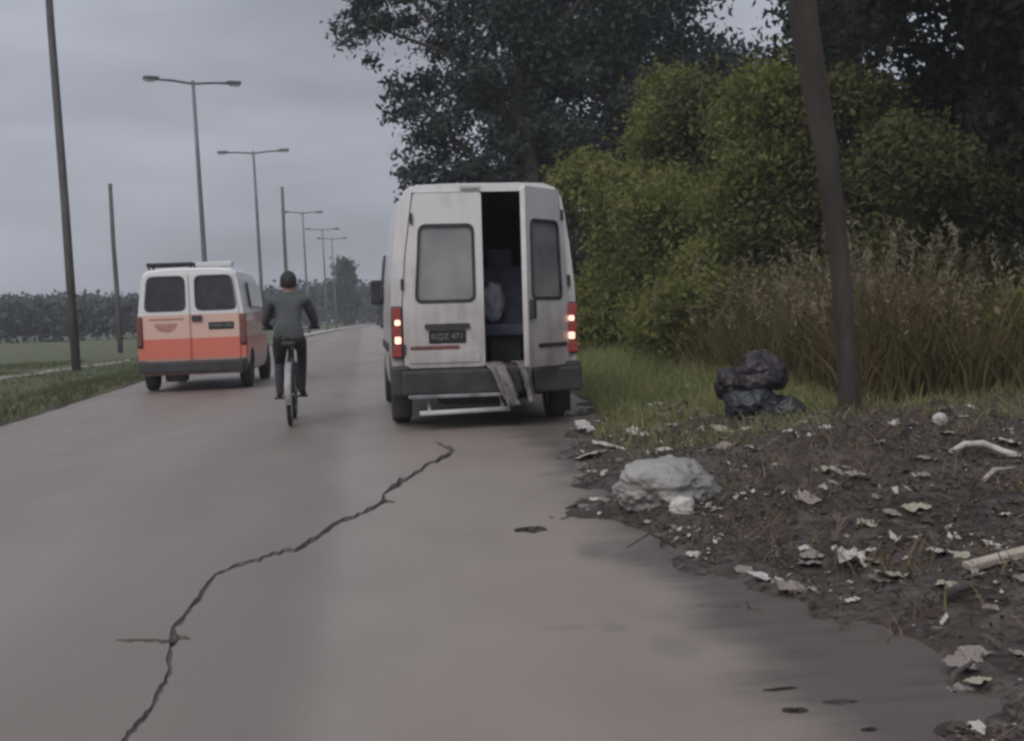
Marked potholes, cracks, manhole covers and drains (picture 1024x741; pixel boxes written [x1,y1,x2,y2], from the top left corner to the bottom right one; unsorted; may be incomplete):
crack [115,442,455,741]
